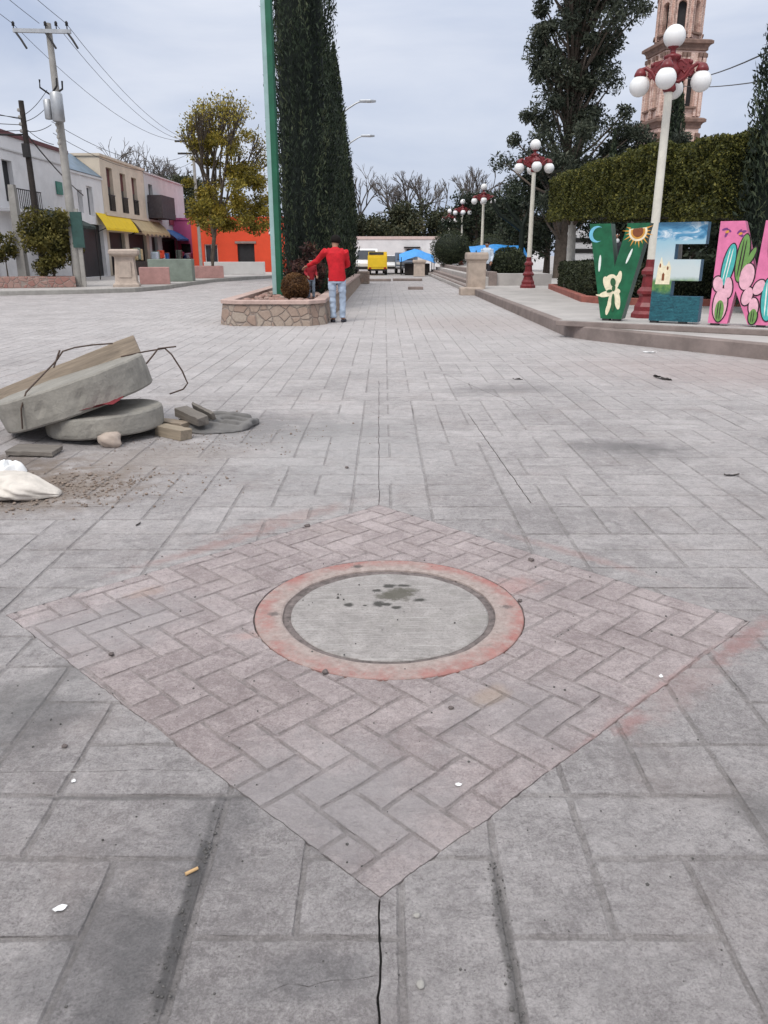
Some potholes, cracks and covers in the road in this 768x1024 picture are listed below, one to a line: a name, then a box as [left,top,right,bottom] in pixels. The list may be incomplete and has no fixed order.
crack [468,414,531,503]
manhole cover [255,560,524,681]
